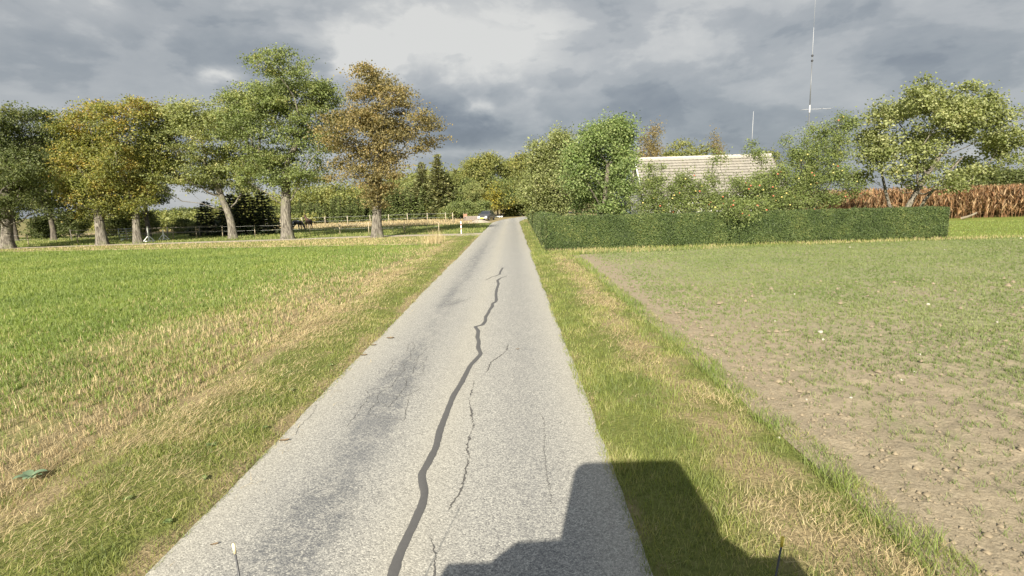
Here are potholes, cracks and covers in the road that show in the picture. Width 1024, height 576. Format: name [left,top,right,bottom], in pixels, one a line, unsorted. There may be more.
crack [347,342,428,426]
crack [448,348,507,510]
